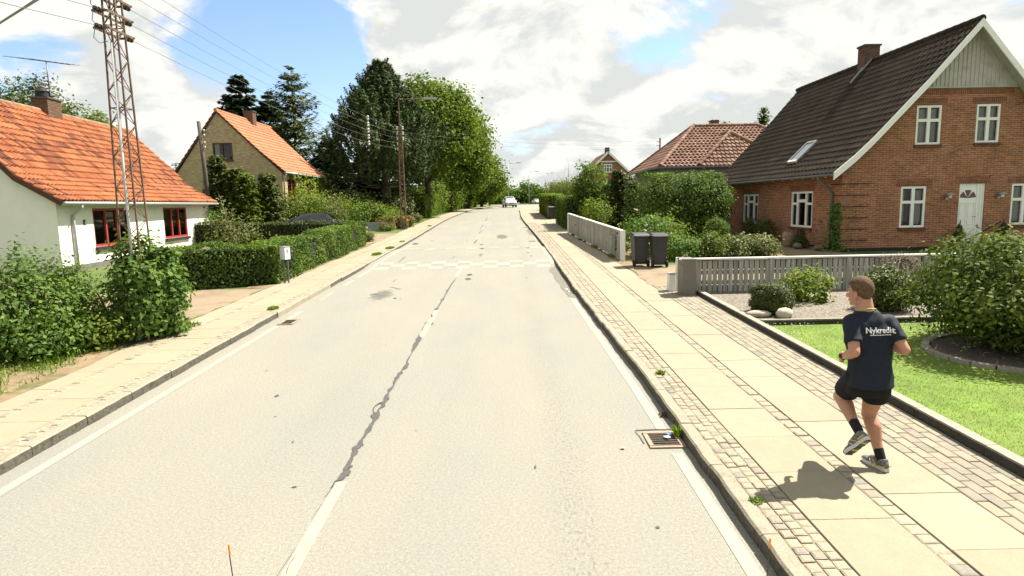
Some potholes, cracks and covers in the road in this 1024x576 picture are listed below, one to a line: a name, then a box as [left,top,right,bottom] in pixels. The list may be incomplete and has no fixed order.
drain grate [642,431,687,449]
crack [313,280,455,517]
